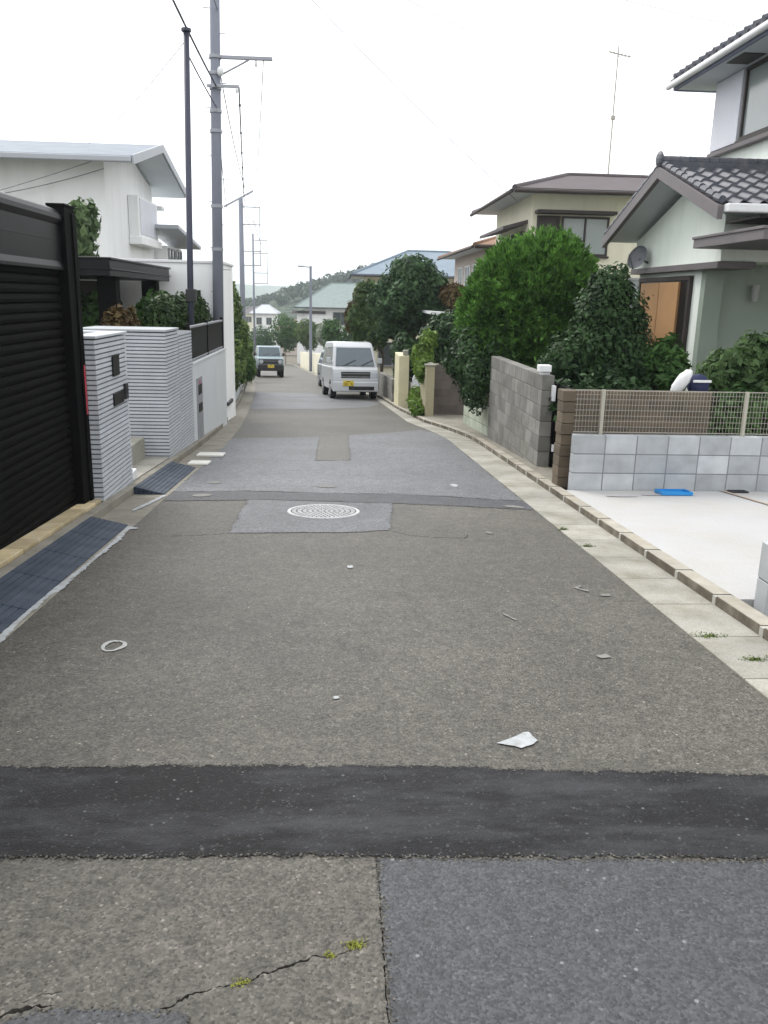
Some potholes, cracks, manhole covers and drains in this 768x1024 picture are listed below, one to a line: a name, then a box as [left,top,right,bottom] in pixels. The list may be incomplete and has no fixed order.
crack [160,941,367,1010]
manhole cover [287,504,360,519]
crack [0,992,58,1019]
